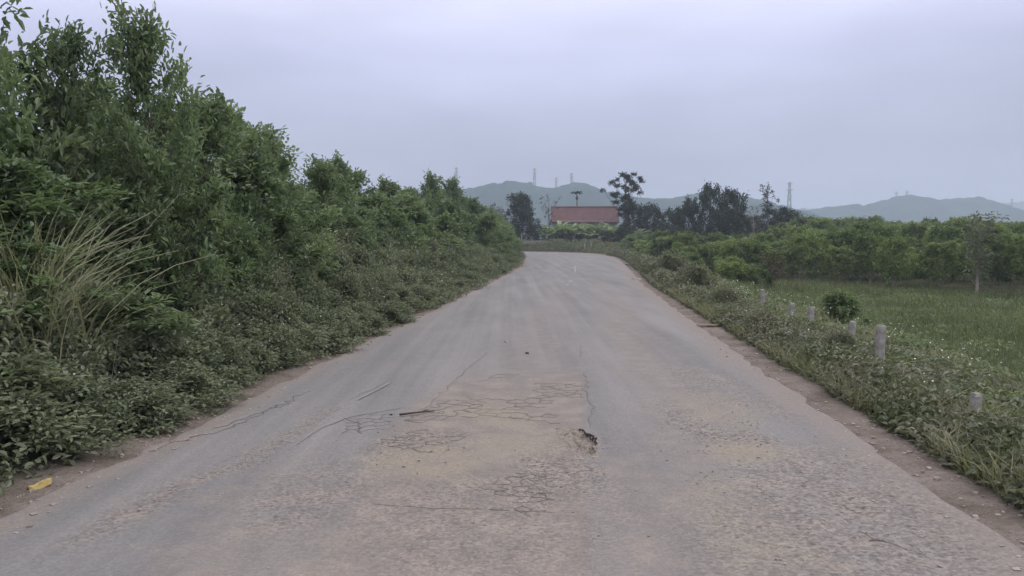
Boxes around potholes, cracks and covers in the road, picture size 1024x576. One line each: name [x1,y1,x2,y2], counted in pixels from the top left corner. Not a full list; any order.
crack [297,361,583,452]
crack [371,473,555,517]
crack [157,391,309,449]
pothole [555,427,600,458]
